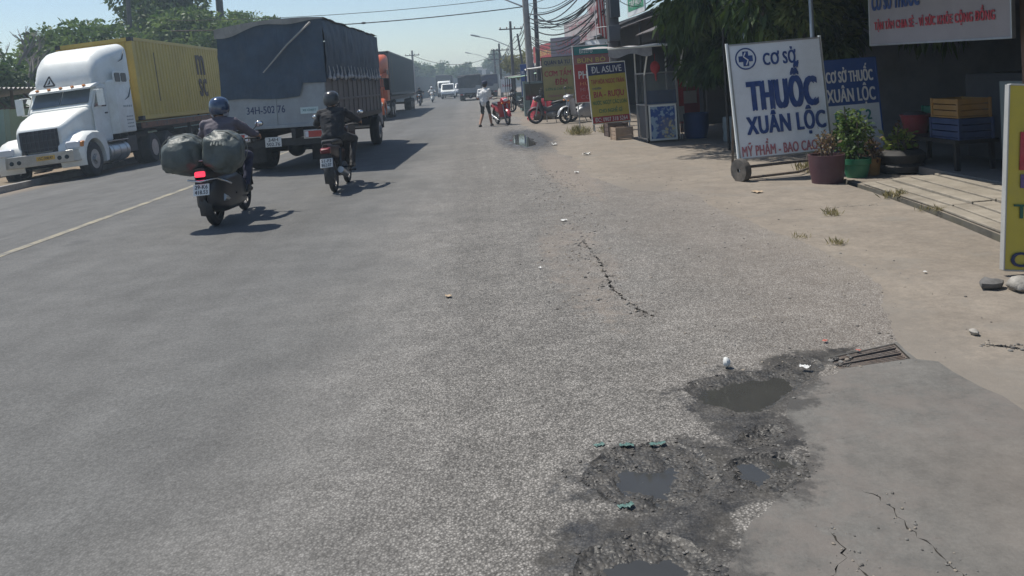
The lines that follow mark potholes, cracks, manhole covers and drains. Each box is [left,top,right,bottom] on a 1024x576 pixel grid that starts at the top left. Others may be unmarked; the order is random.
pothole [676,356,830,415]
crack [863,491,978,576]
pothole [560,520,729,576]
pothole [560,435,733,520]
crack [815,523,881,576]
crack [980,340,1024,352]
pothole [509,130,545,148]
crack [568,239,655,317]
drain grate [827,343,911,369]
